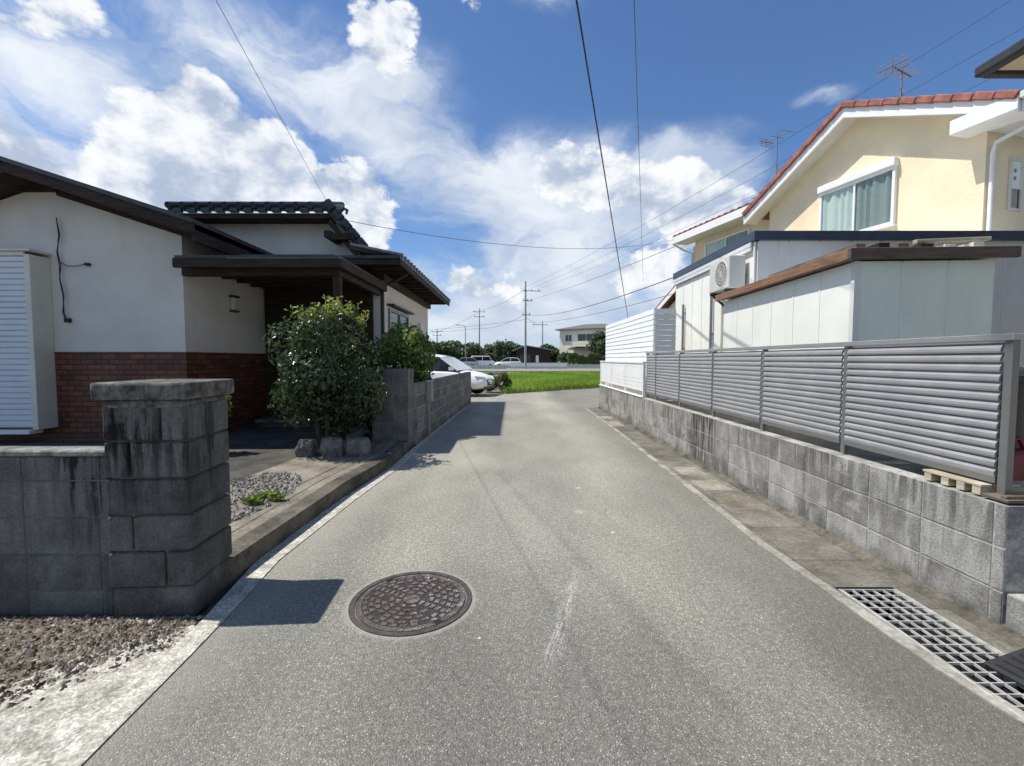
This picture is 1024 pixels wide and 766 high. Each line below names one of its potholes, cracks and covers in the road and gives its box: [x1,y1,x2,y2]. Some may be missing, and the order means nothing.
drain grate [839,589,1024,719]
manhole cover [348,571,472,637]
